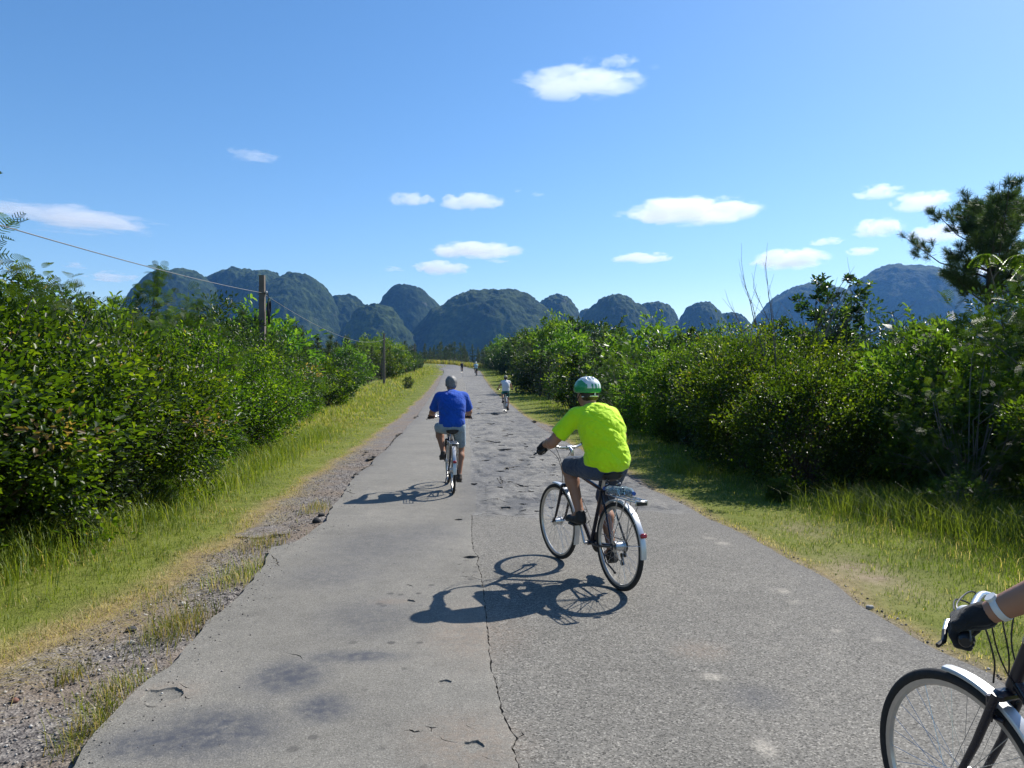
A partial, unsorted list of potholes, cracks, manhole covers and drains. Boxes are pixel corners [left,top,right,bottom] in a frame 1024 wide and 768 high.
pothole [140,687,184,710]
